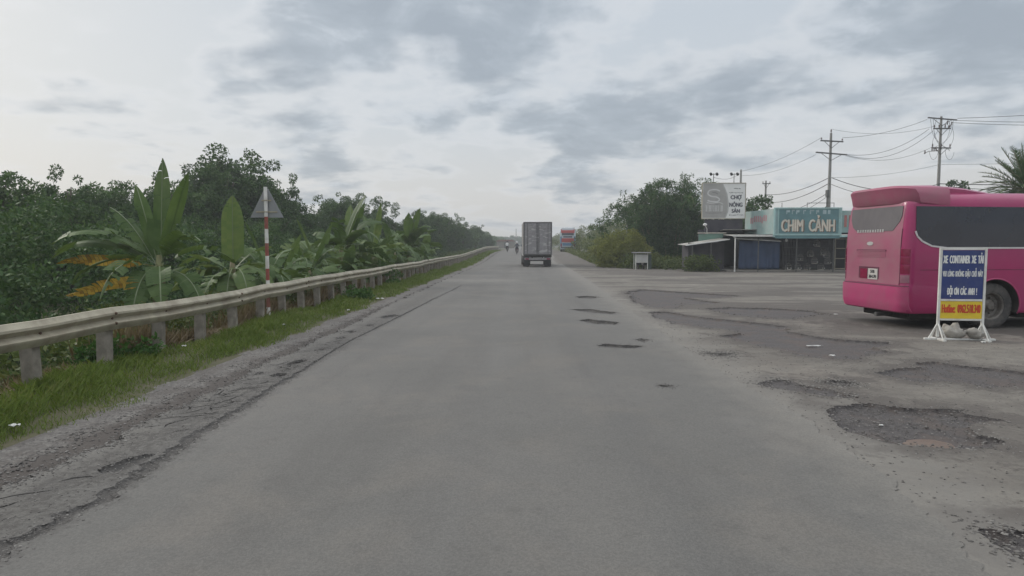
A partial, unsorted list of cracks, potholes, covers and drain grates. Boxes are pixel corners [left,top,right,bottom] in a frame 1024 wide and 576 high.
pothole [978,528,1024,559]
pothole [874,361,1024,388]
crack [0,286,460,562]
pothole [758,379,859,398]
pothole [827,403,1006,449]
